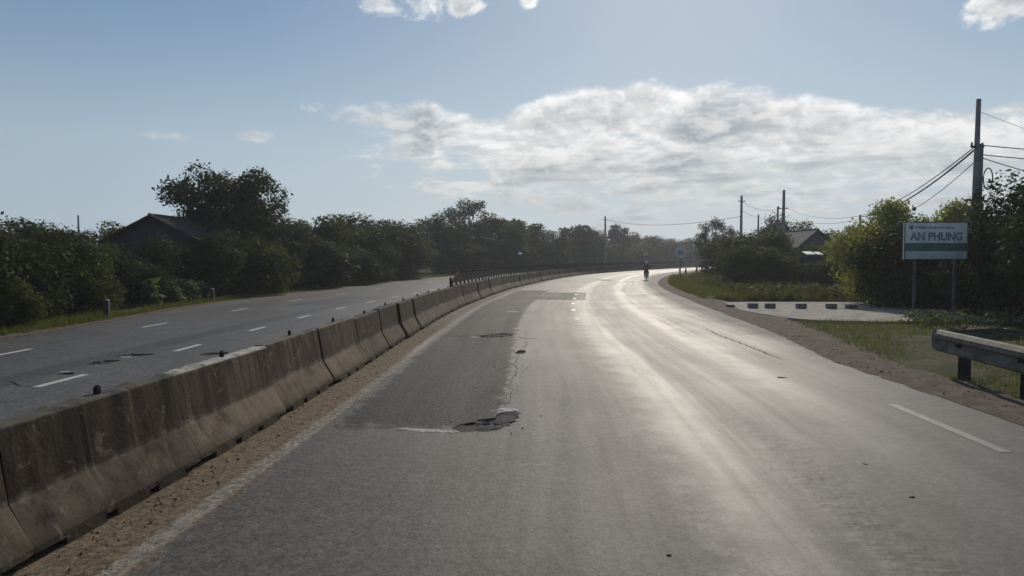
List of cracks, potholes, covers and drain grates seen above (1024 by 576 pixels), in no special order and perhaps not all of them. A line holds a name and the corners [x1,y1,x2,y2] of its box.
pothole [397,408,521,433]
crack [707,329,783,360]
crack [495,336,534,400]
